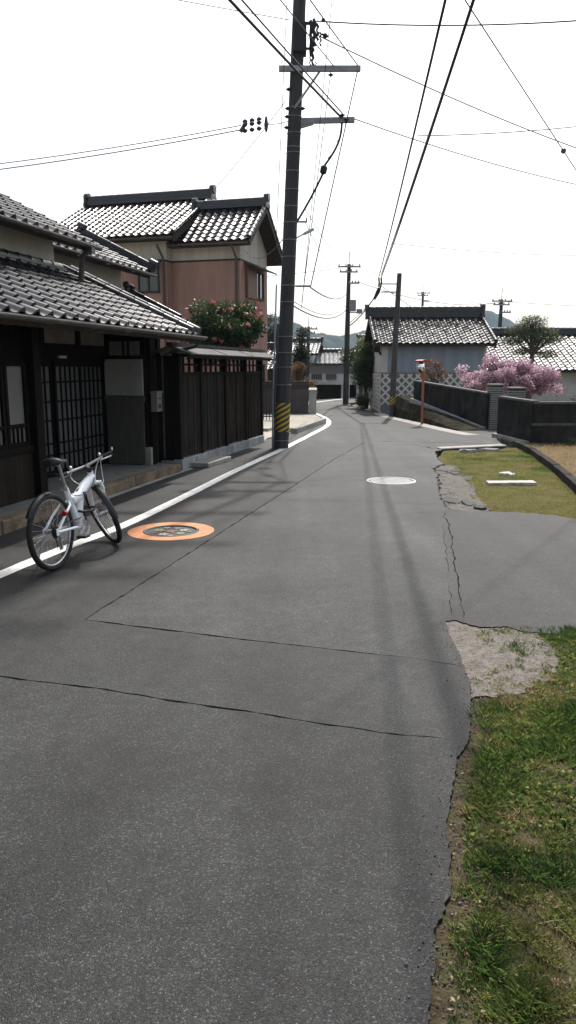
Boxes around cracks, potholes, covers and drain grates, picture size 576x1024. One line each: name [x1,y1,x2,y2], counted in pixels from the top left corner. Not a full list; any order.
manhole cover [127,522,214,540]
manhole cover [367,477,416,485]
crack [442,514,465,618]
